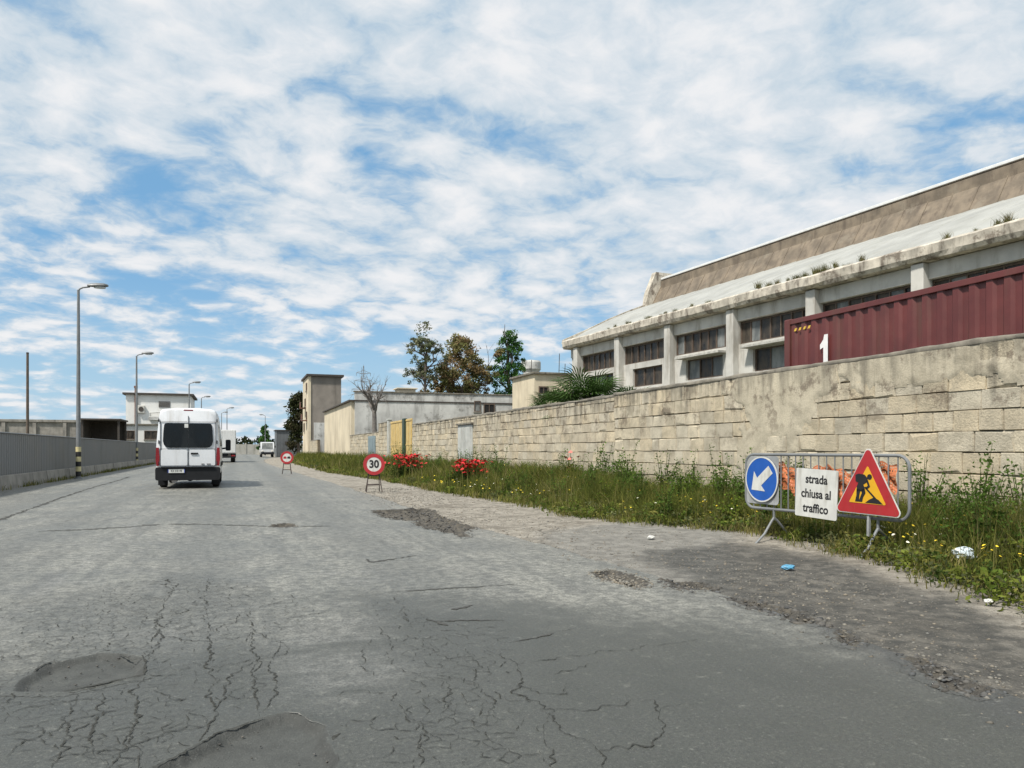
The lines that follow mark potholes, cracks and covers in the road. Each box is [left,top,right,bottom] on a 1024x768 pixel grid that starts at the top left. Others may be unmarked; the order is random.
pothole [135,708,358,768]
pothole [657,578,724,595]
pothole [586,568,657,590]
crack [0,581,253,768]
crack [393,584,509,625]
pothole [368,507,480,539]
crack [332,596,697,768]
crack [138,573,324,716]
pothole [0,650,160,697]
